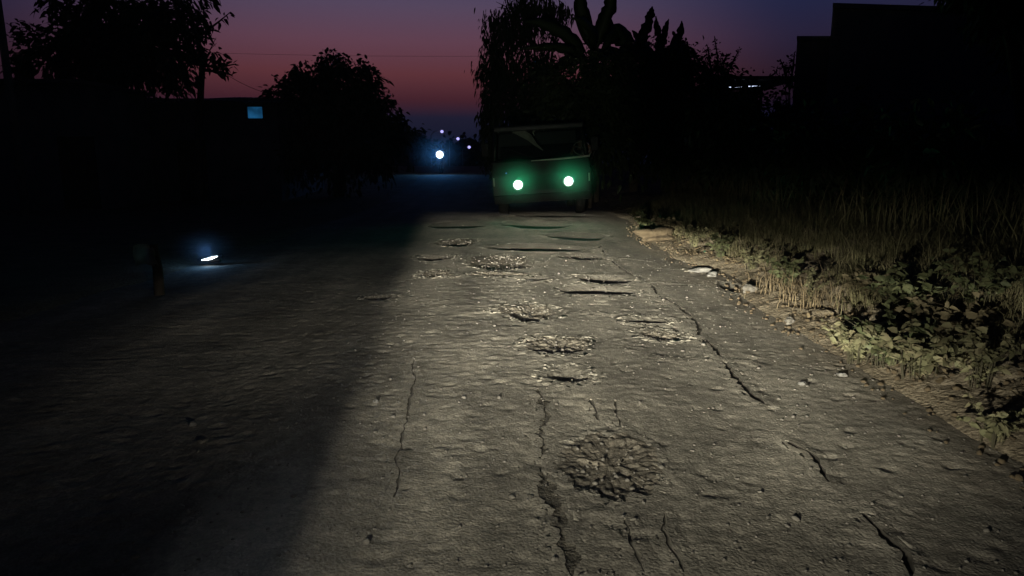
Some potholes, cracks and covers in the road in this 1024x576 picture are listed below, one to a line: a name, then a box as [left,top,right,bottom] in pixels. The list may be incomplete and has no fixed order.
pothole [484,301,568,325]
pothole [541,428,676,508]
pothole [608,314,684,327]
crack [378,358,426,501]
pothole [565,273,644,286]
pothole [549,283,649,298]
pothole [428,238,483,248]
pothole [625,327,697,344]
pothole [526,362,608,388]
pothole [458,254,541,271]
pothole [508,332,606,359]
crack [523,246,935,576]
